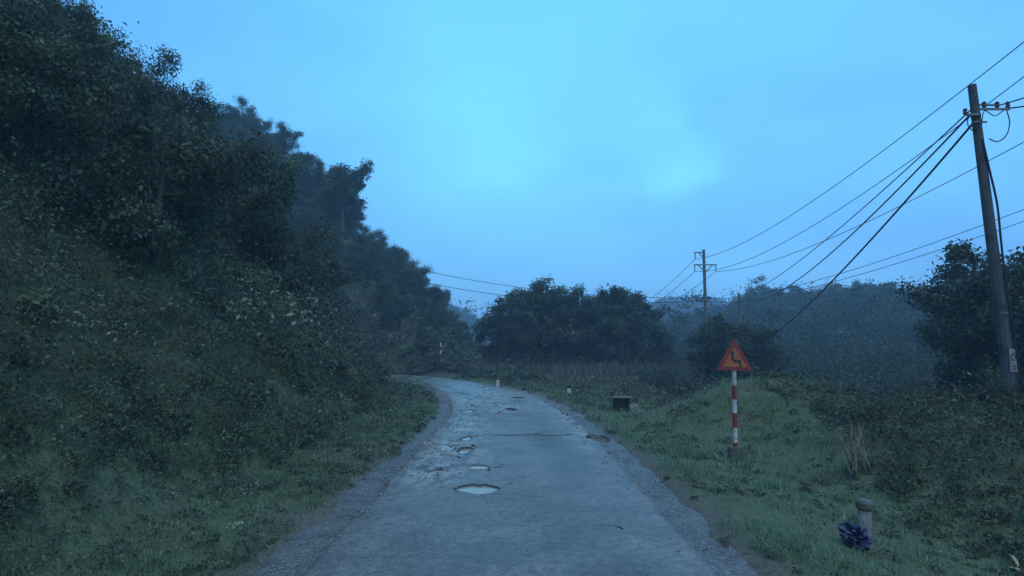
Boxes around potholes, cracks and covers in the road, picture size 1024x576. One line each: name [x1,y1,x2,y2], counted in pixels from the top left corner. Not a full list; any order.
crack [430,386,580,458]
pothole [454,484,500,494]
